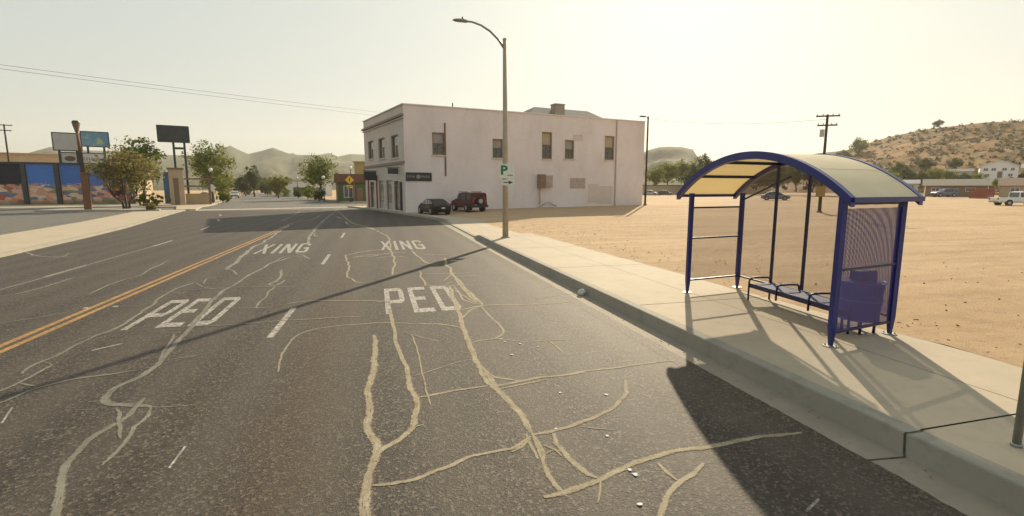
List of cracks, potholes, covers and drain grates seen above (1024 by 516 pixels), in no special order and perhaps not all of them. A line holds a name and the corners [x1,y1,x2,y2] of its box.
crack [2,277,74,323]
